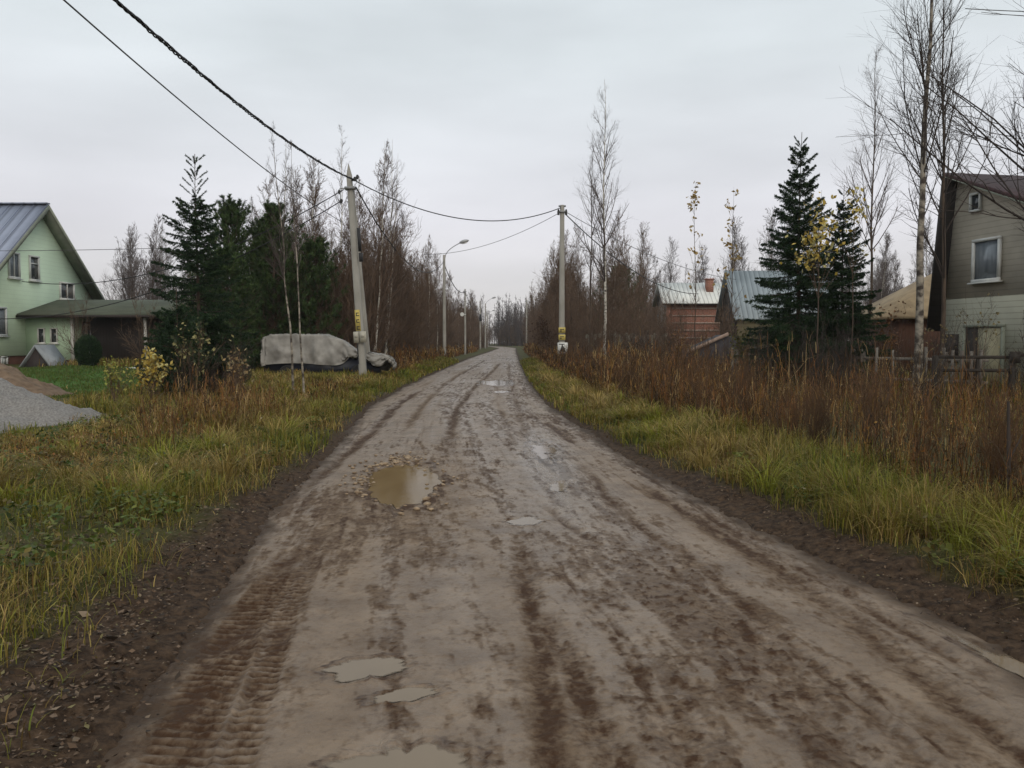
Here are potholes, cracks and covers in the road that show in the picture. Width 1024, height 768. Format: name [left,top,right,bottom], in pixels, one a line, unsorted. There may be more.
pothole [338,451,463,518]
pothole [305,652,425,688]
pothole [354,683,458,708]
